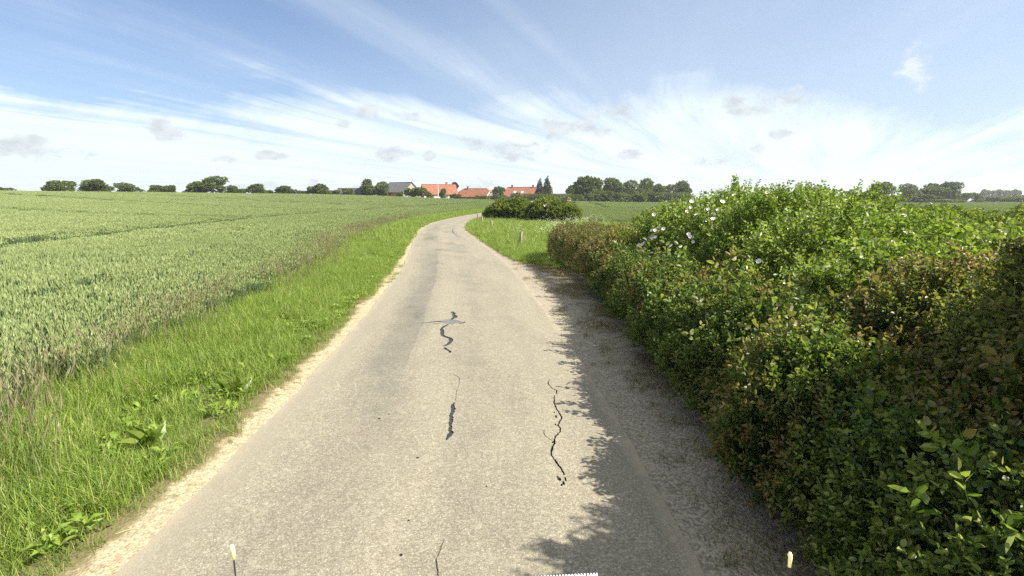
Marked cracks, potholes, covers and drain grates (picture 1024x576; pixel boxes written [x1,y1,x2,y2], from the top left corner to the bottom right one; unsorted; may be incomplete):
crack [435,541,444,576]
crack [446,377,460,440]
crack [424,312,465,353]
crack [543,381,567,486]
